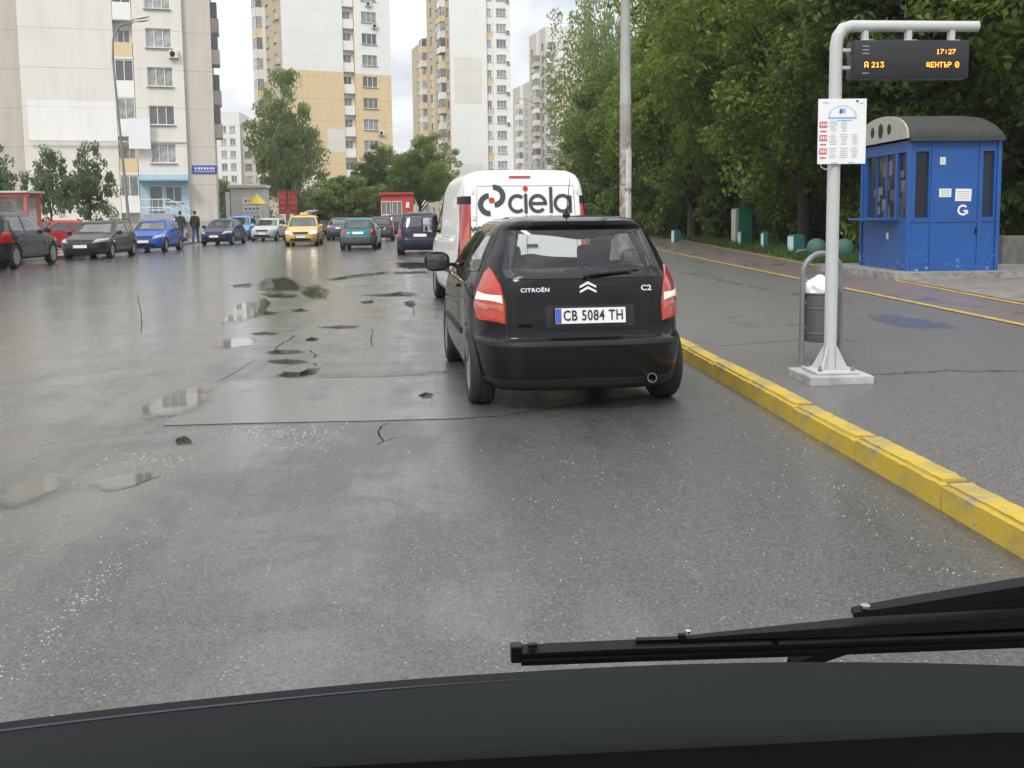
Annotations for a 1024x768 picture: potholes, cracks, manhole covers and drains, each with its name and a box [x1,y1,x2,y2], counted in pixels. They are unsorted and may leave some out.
pothole [258,276,303,292]
crack [275,335,318,366]
pothole [277,368,320,378]
pothole [302,285,329,299]
pothole [175,436,194,445]
